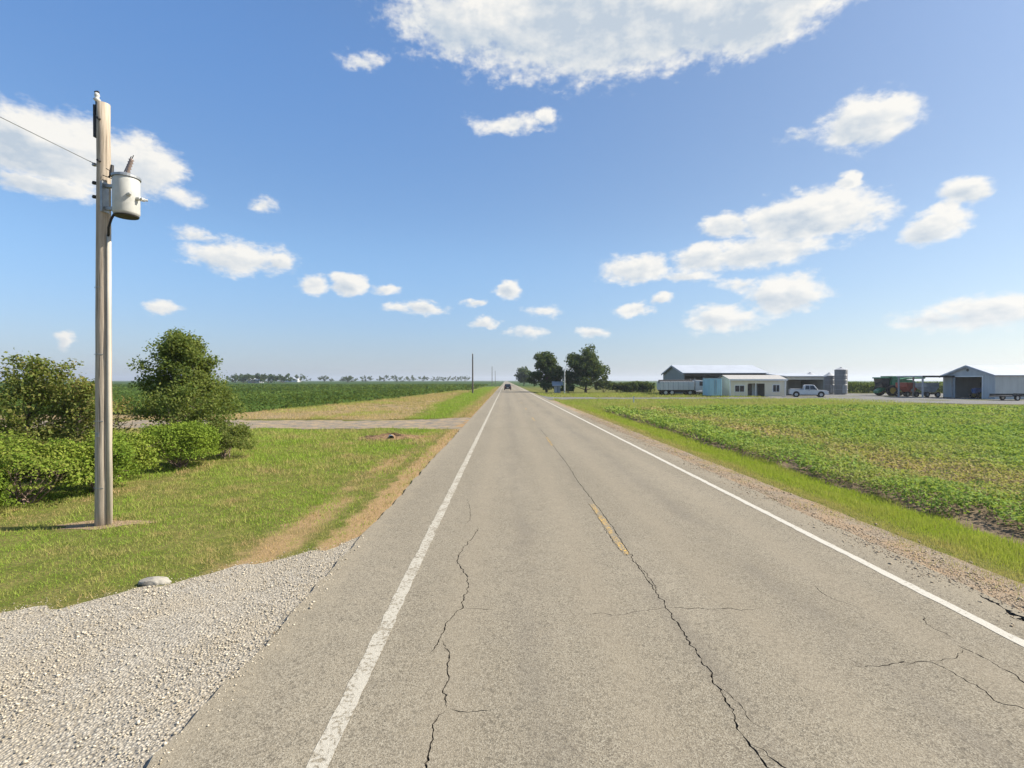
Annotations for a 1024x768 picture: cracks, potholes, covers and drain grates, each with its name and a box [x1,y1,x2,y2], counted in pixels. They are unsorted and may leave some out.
crack [424,501,496,768]
crack [541,430,786,768]
crack [980,595,1024,621]
crack [858,615,1024,709]
